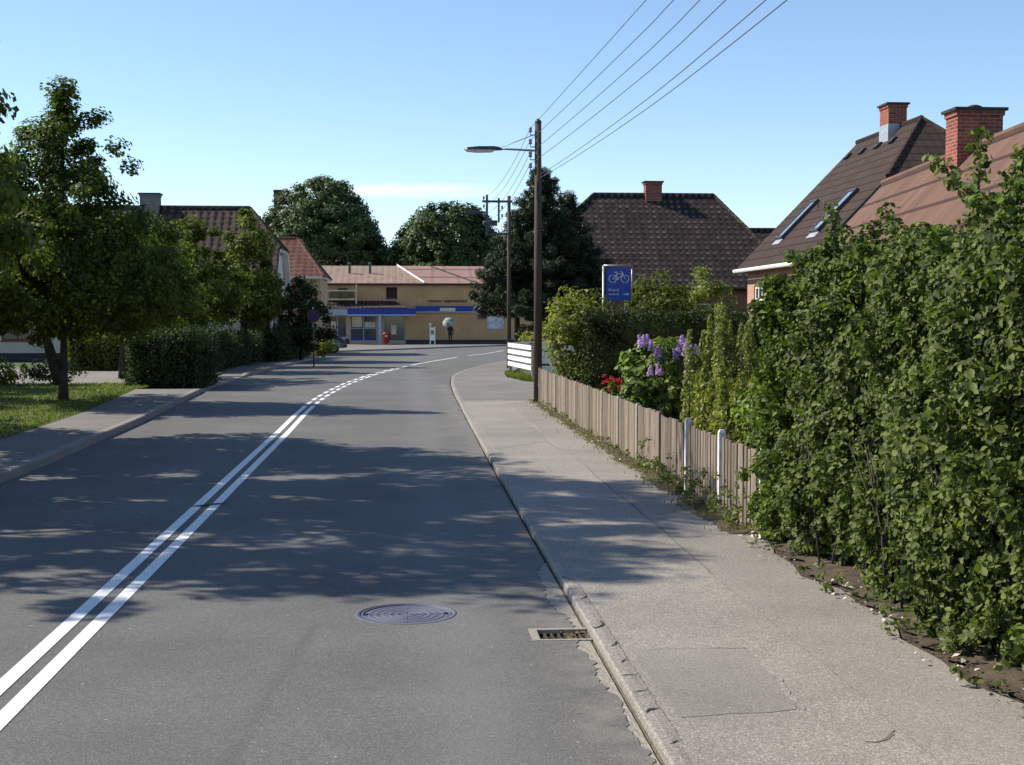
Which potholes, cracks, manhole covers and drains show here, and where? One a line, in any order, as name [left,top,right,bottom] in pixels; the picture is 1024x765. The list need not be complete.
manhole cover [355,603,457,625]
